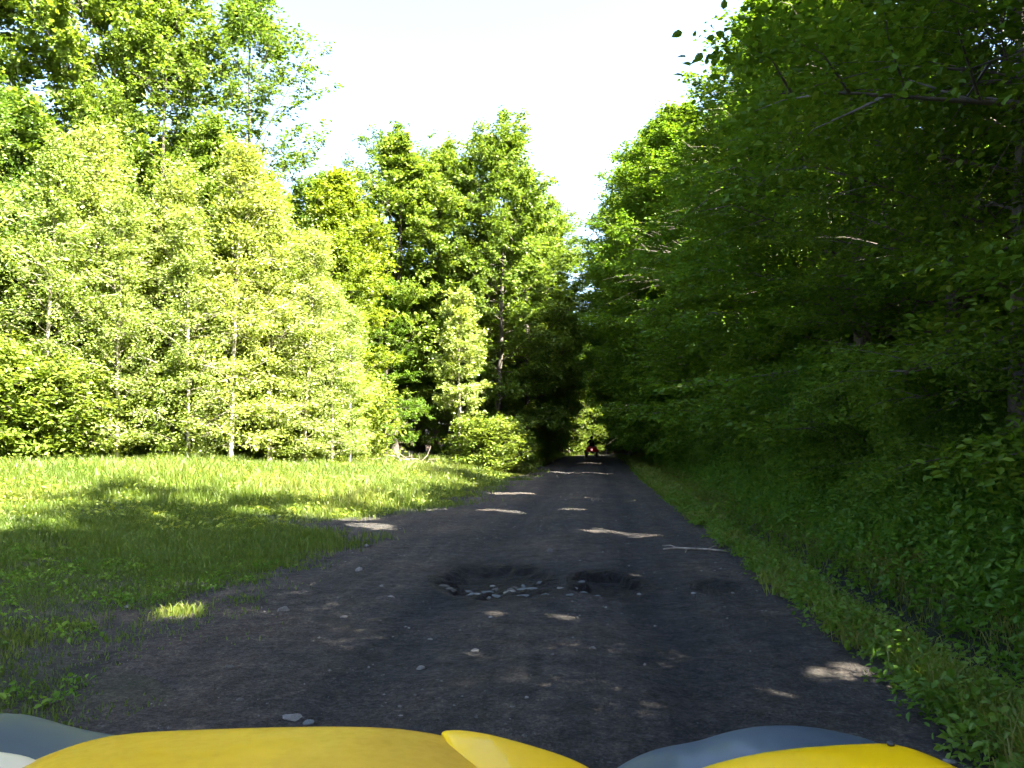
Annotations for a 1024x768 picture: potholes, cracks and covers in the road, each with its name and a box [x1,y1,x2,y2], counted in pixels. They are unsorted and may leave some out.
pothole [426,563,562,603]
pothole [690,578,744,595]
pothole [567,569,659,598]
